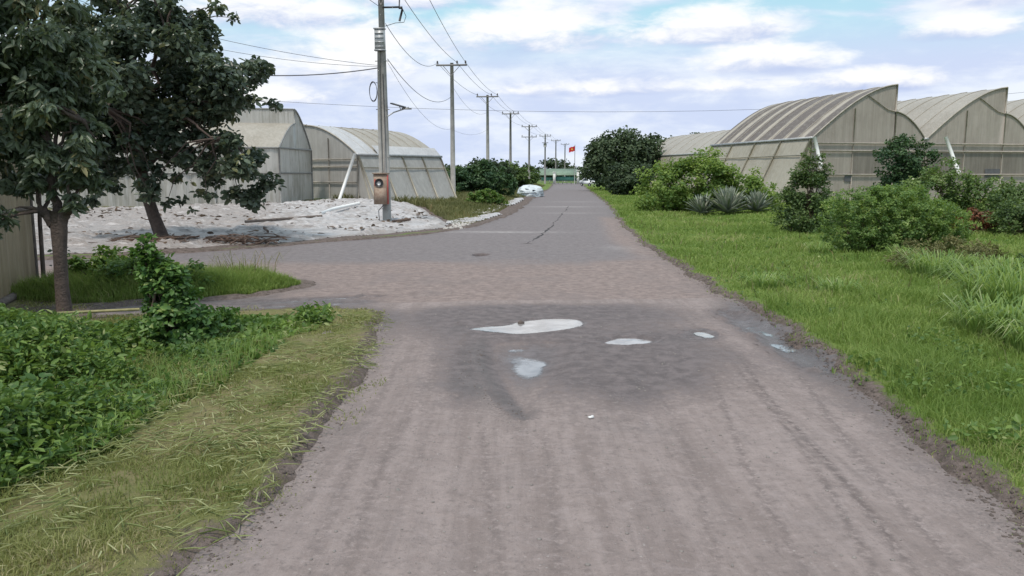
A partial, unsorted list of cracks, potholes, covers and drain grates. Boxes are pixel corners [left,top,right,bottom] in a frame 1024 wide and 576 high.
pothole [672,327,731,341]
pothole [584,334,676,349]
pothole [458,316,598,336]
pothole [470,336,590,423]
crack [523,206,573,243]
